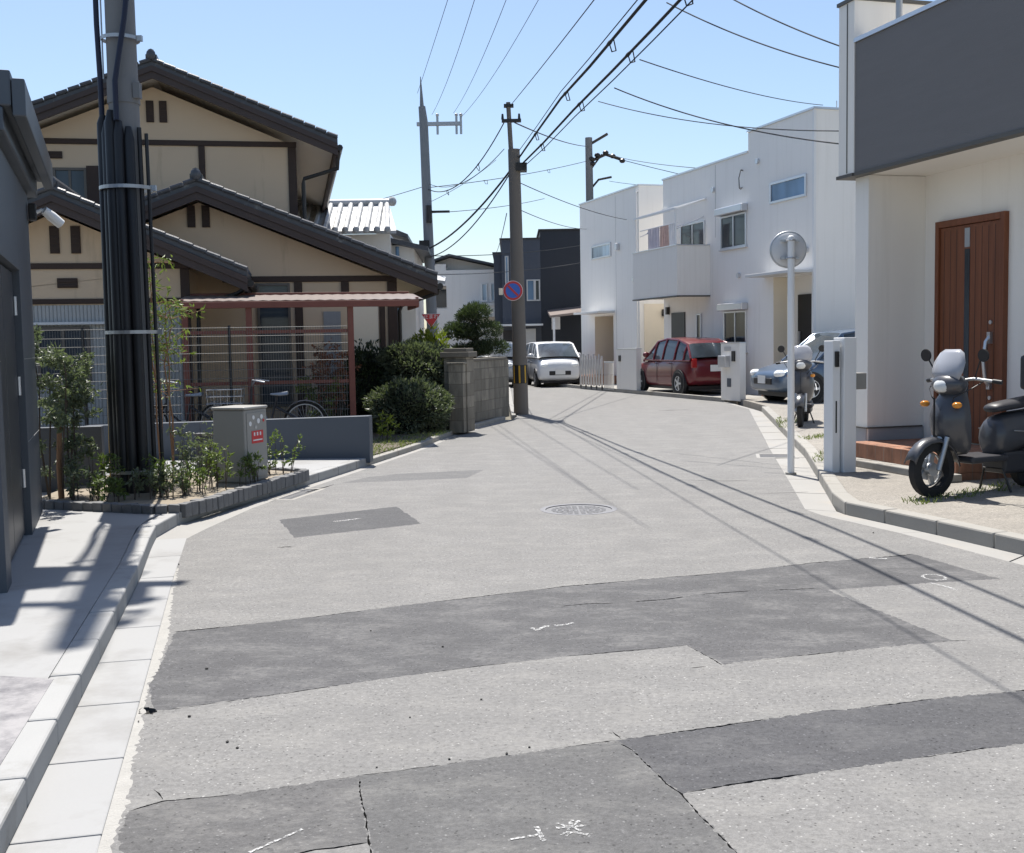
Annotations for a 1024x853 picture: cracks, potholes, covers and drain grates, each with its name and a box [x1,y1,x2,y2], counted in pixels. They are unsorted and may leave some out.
drain grate [267,488,324,500]
manhole cover [540,503,617,515]
